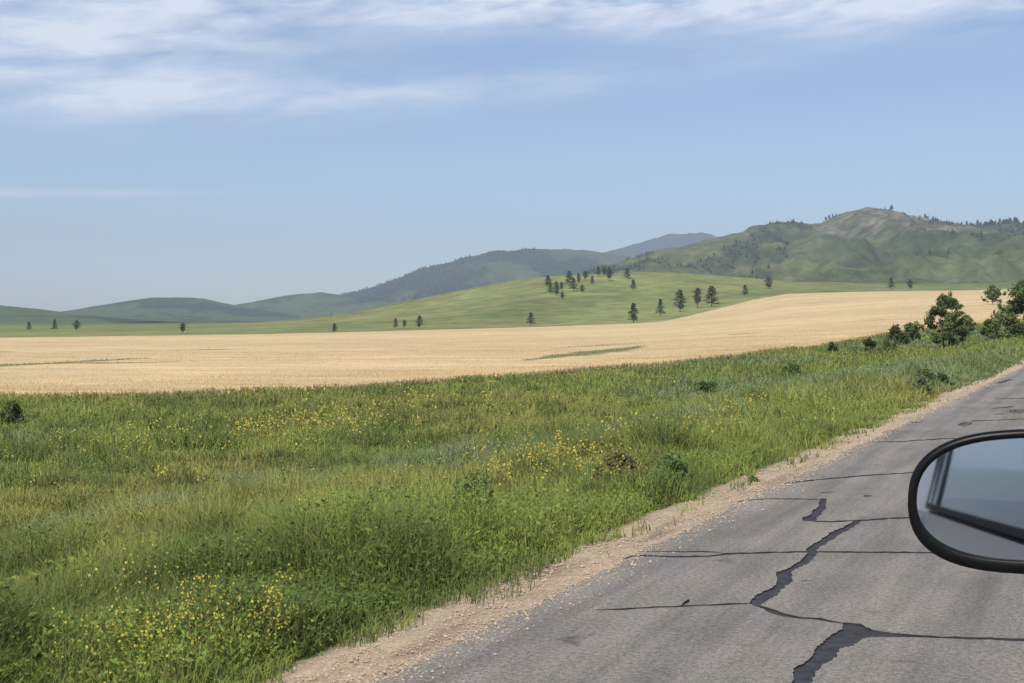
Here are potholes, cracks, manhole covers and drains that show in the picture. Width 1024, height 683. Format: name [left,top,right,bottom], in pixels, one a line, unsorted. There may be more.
crack [600,472,1024,683]
crack [976,379,1024,421]
crack [873,422,956,442]
